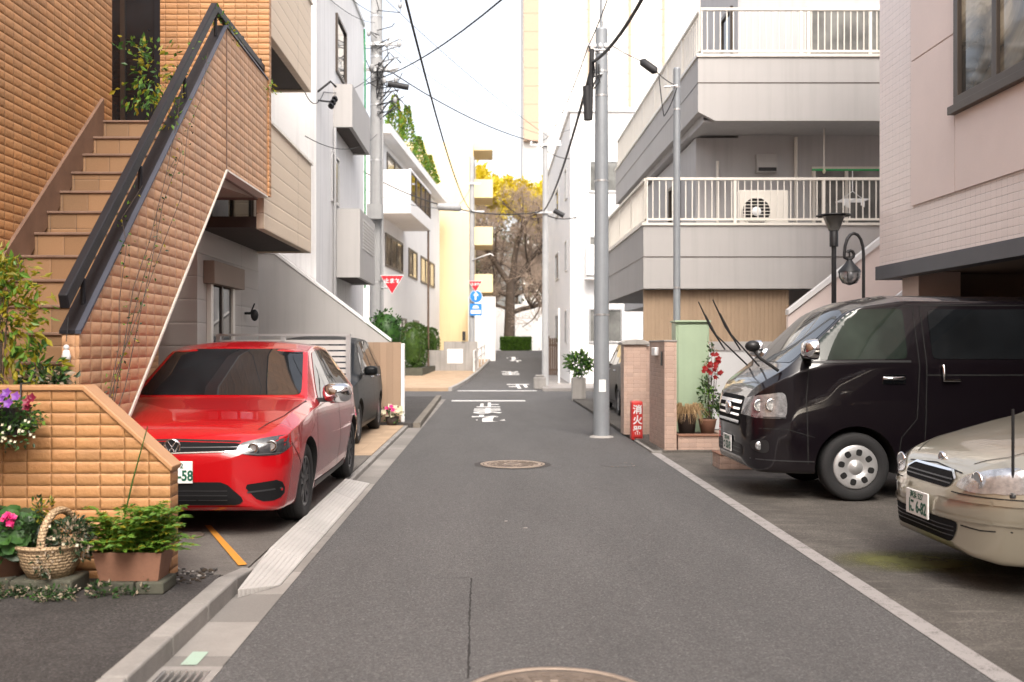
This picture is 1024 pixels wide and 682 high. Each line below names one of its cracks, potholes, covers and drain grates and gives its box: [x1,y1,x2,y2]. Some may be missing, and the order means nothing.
manhole cover [464,664,643,682]
drain grate [147,666,223,682]
manhole cover [474,460,551,469]
